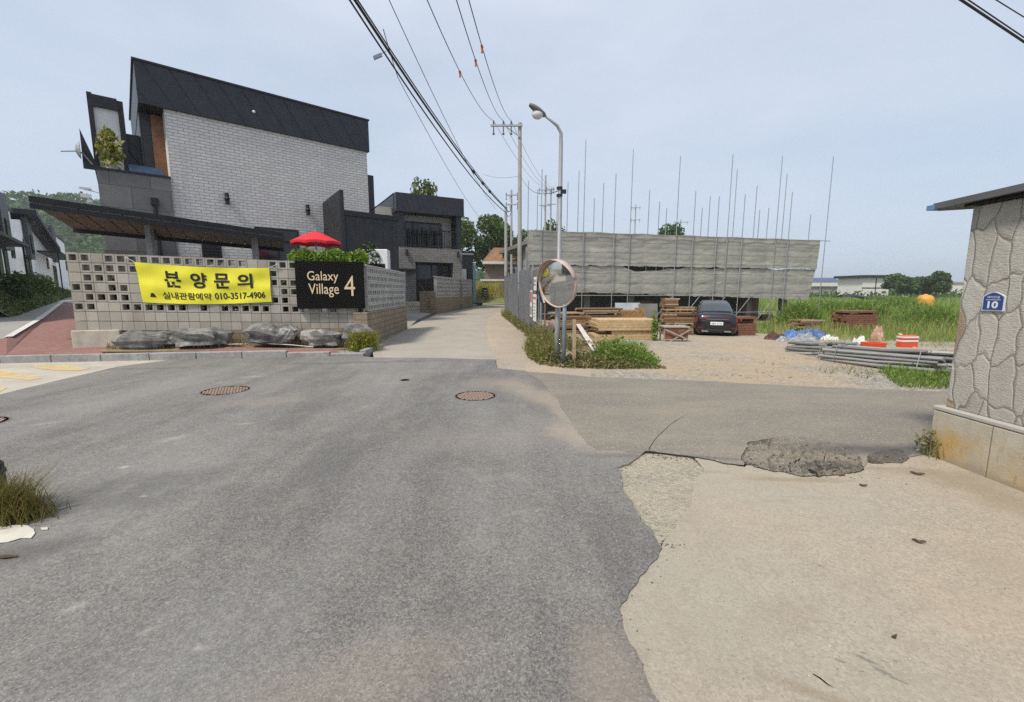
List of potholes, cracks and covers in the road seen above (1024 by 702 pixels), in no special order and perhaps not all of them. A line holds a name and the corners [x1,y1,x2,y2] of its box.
pothole [867,449,913,464]
manhole cover [454,391,497,401]
crack [645,451,745,467]
manhole cover [199,386,251,396]
pothole [741,436,864,478]
